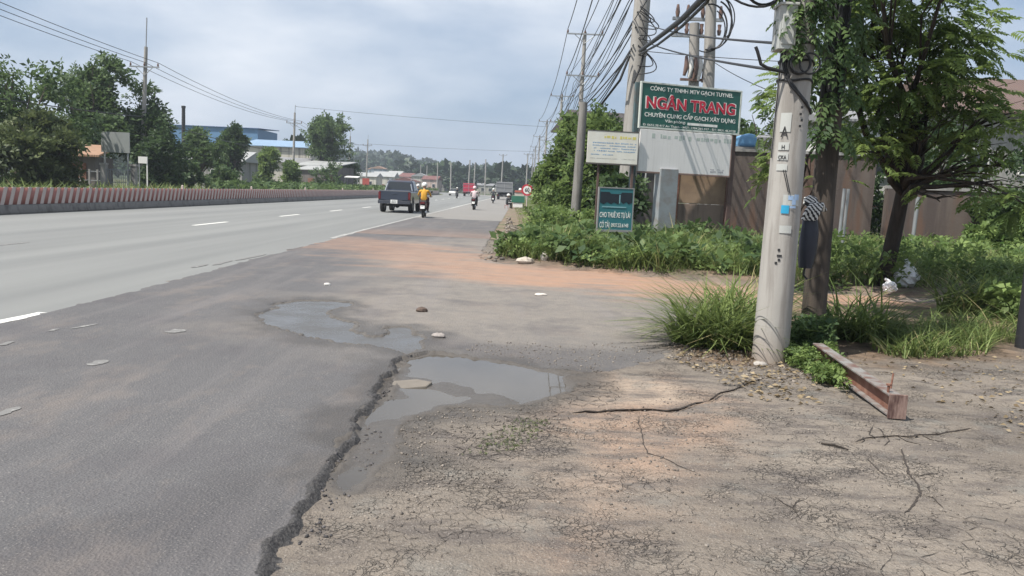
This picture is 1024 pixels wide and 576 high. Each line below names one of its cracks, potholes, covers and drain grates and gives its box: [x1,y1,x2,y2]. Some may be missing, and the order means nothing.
pothole [326,350,578,495]
pothole [253,299,427,358]
crack [255,356,514,576]
crack [454,378,764,472]
crack [852,426,1024,576]
